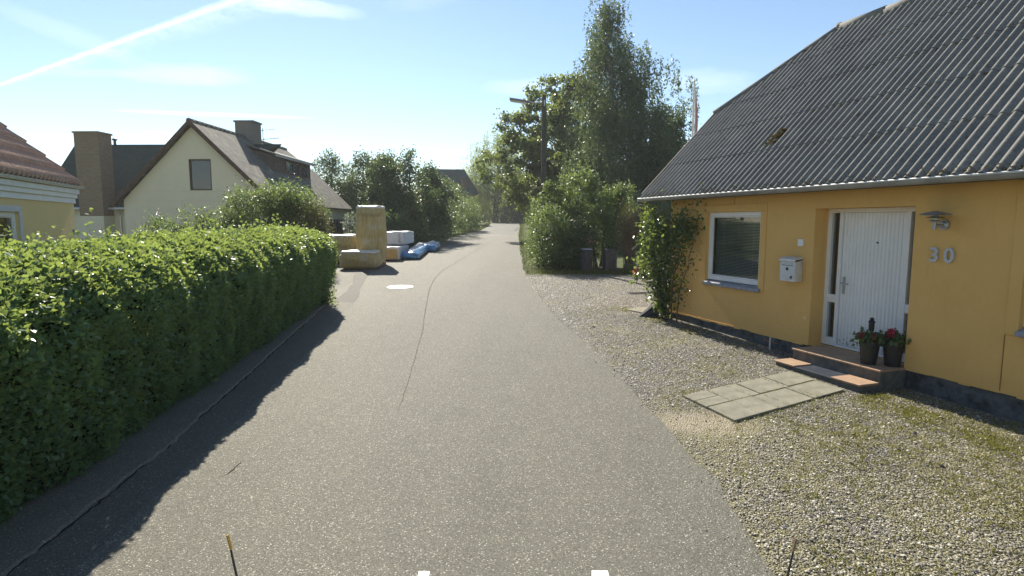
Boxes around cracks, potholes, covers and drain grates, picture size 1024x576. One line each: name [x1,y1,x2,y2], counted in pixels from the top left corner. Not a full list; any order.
crack [399,243,488,406]
